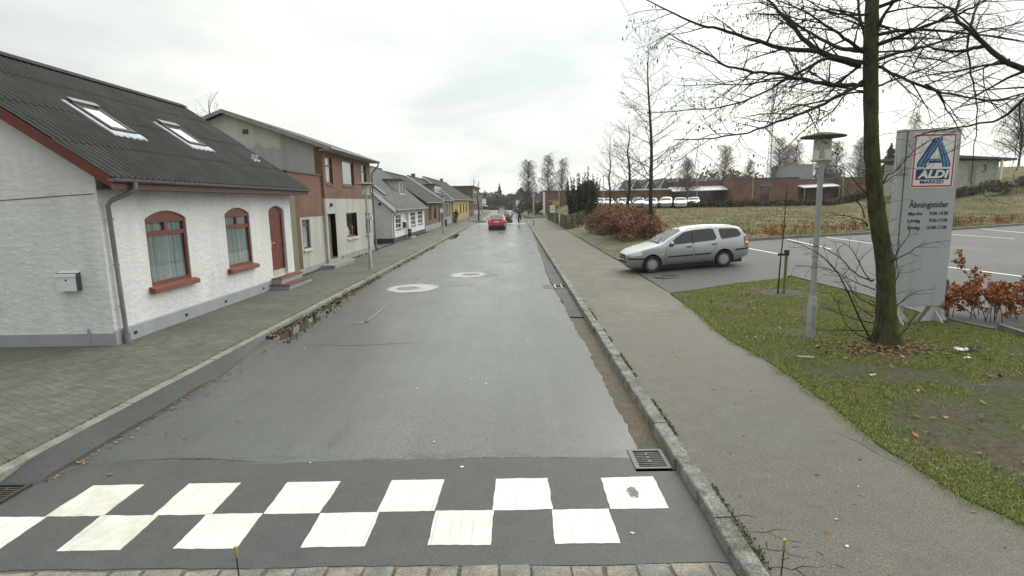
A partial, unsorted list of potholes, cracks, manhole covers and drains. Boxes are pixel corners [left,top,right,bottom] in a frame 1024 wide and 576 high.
manhole cover [385,283,440,293]
drain grate [0,483,33,505]
drain grate [627,449,672,469]
